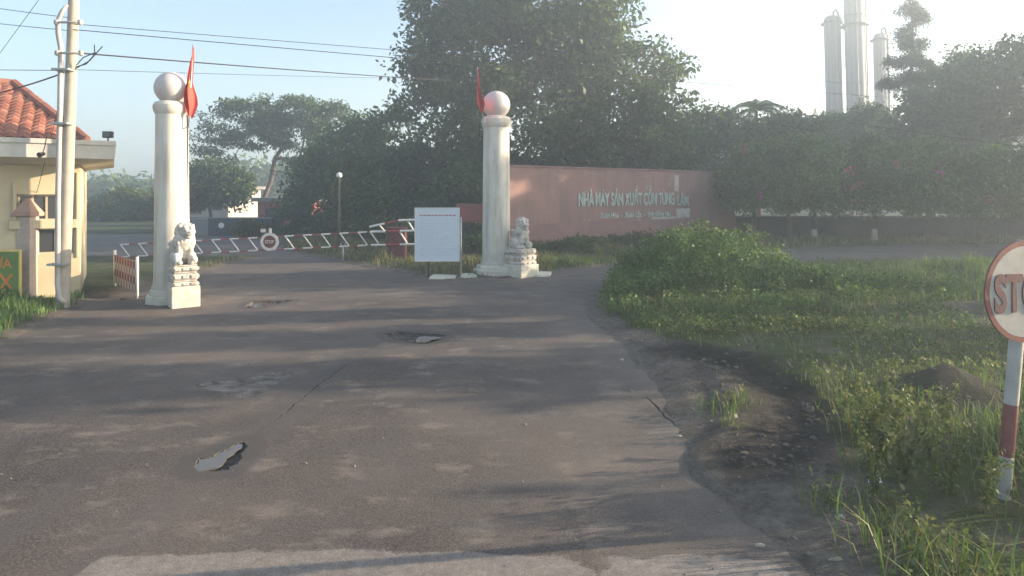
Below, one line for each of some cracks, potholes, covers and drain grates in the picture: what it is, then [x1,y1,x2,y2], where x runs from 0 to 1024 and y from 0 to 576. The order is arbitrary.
pothole [384,331,446,344]
crack [250,339,385,438]
pothole [245,300,292,308]
pothole [194,442,248,472]
